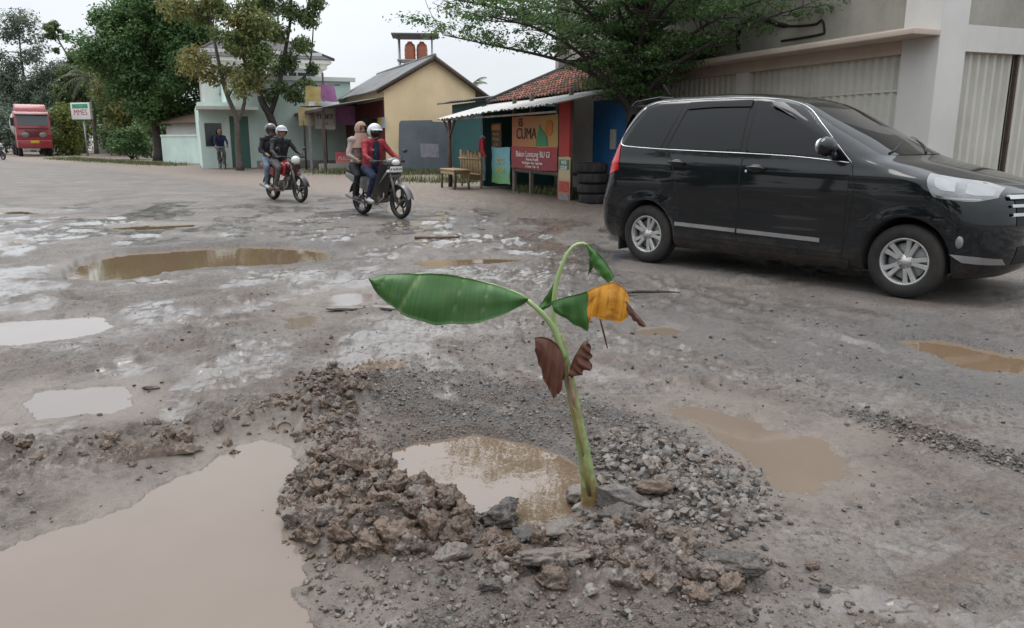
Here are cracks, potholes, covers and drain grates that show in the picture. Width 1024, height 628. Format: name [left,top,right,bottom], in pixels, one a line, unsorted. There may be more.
pothole [650,400,869,498]
pothole [0,311,127,347]
pothole [49,240,352,283]
pothole [376,422,596,539]
pothole [9,380,145,422]
pothole [400,253,536,268]
pothole [890,332,1024,376]
pothole [0,434,341,628]
